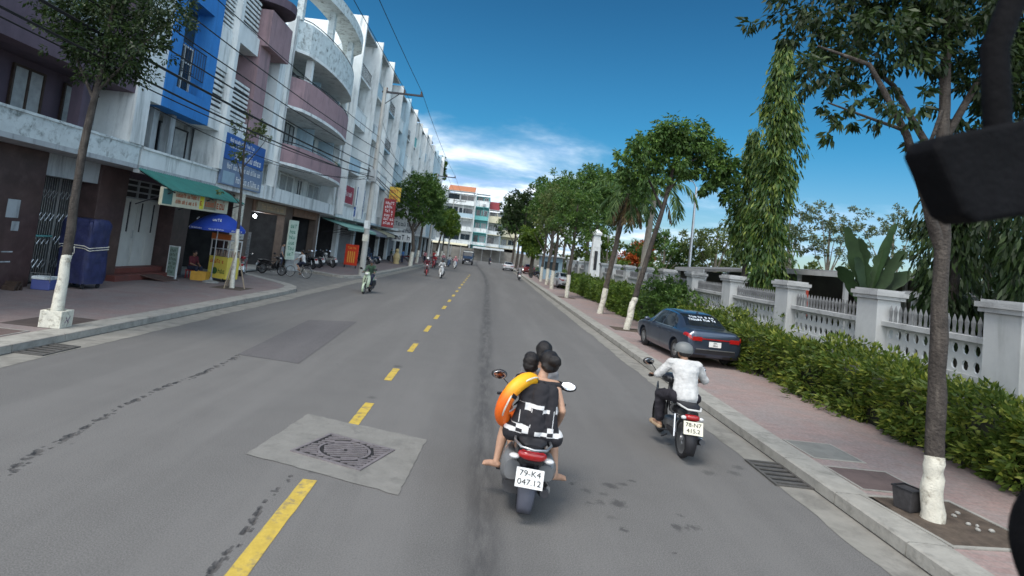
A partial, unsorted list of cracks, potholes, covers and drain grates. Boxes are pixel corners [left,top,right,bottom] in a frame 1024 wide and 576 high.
drain grate [745,459,815,490]
crack [205,475,293,576]
drain grate [12,343,81,356]
manhole cover [290,433,395,471]
crack [8,355,240,476]
